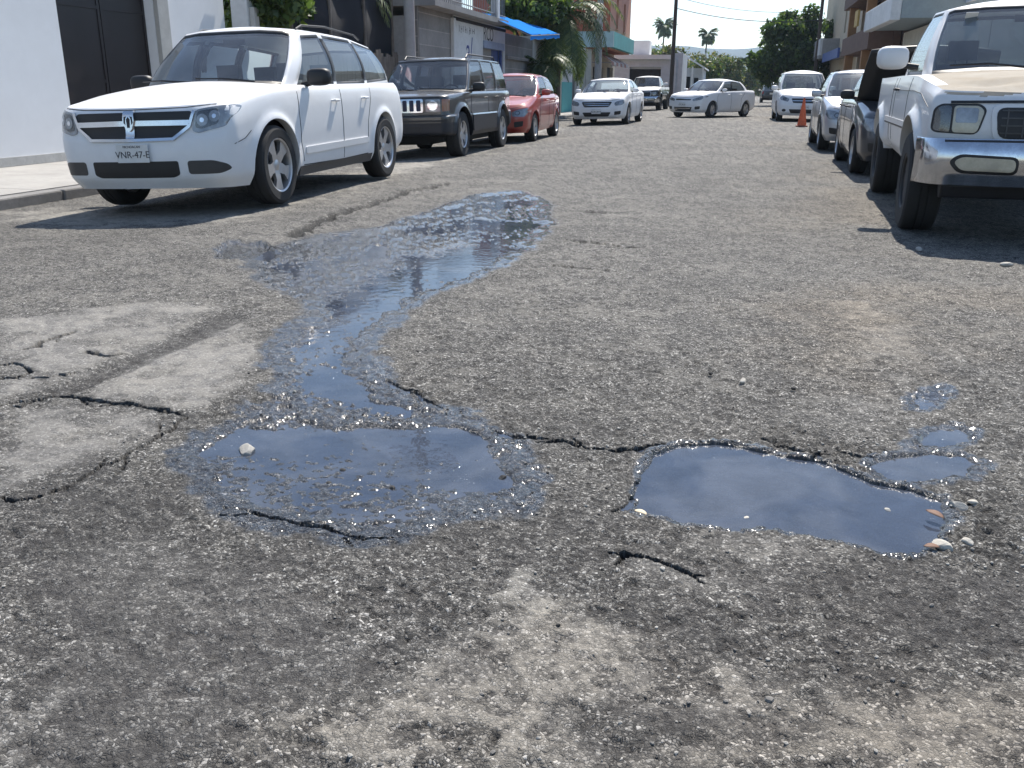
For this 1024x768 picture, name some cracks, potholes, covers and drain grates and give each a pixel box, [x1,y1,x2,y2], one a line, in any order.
pothole [862,448,987,484]
pothole [904,423,979,448]
crack [496,432,661,453]
pothole [904,383,954,412]
crack [2,333,189,484]
pothole [630,439,956,557]
pothole [255,191,553,424]
crack [2,487,68,503]
pothole [184,416,530,536]
crack [760,437,875,459]
crack [609,550,705,584]
crack [385,379,443,409]
